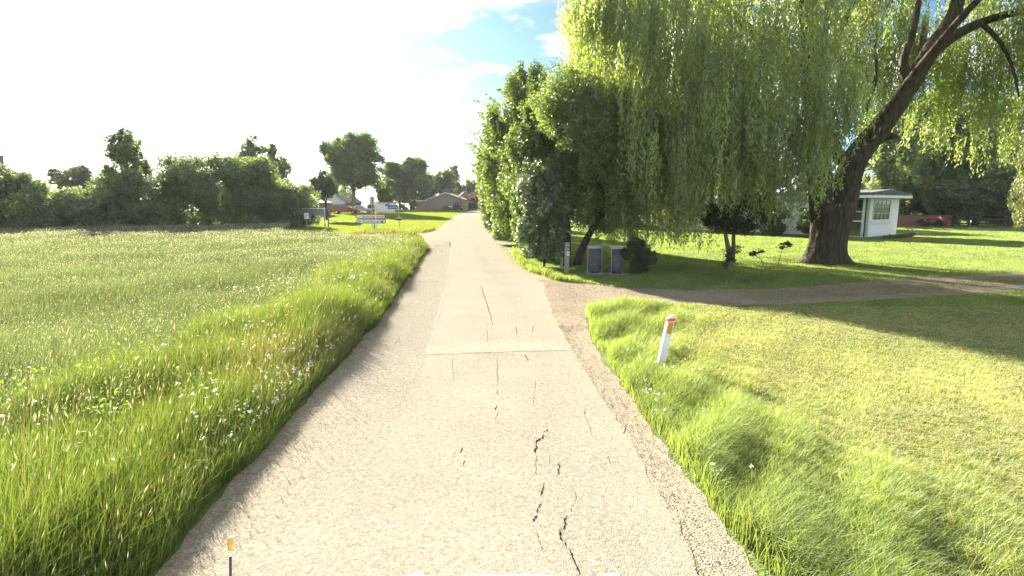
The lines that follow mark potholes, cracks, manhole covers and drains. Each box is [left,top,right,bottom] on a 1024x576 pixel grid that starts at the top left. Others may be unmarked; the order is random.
crack [478,291,527,418]
crack [533,429,580,573]
